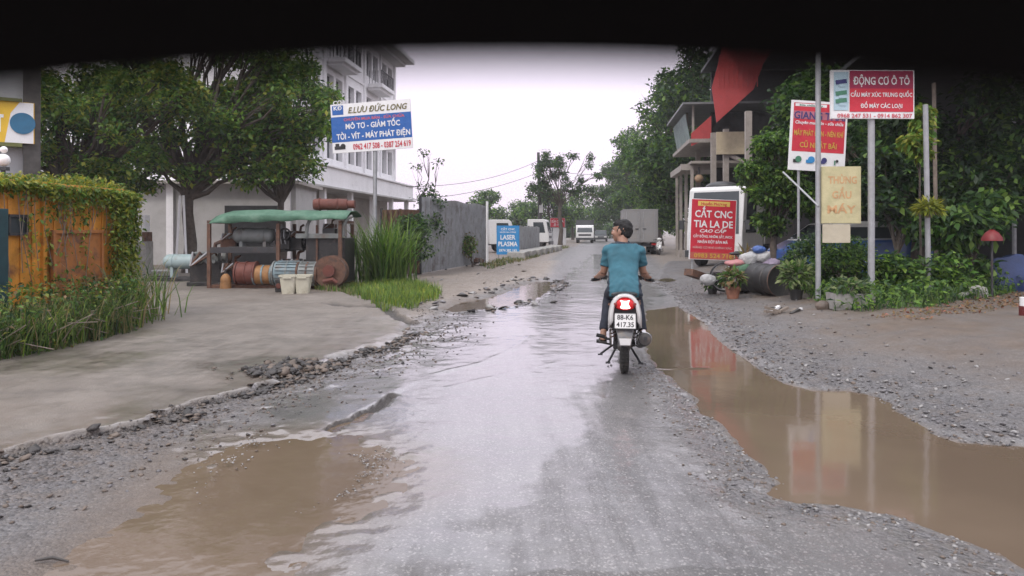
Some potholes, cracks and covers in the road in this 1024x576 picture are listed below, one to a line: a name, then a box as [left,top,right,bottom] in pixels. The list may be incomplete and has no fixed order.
pothole [638,304,1024,576]
pothole [43,413,424,576]
pothole [425,278,558,313]
